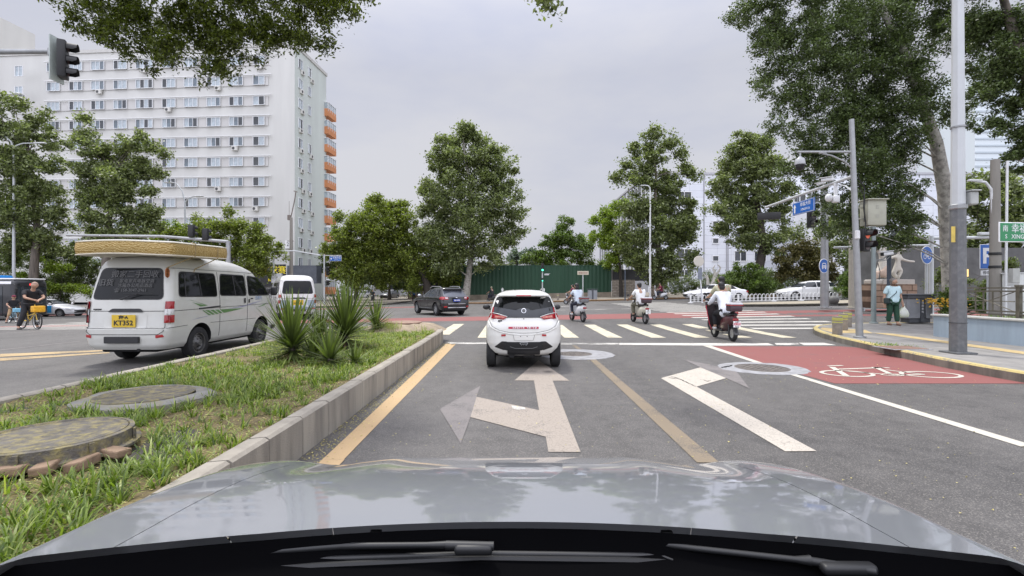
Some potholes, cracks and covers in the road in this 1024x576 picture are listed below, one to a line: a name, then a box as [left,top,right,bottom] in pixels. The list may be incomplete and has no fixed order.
manhole cover [718,362,811,375]
manhole cover [0,417,142,473]
manhole cover [541,349,615,360]
manhole cover [67,385,217,416]
